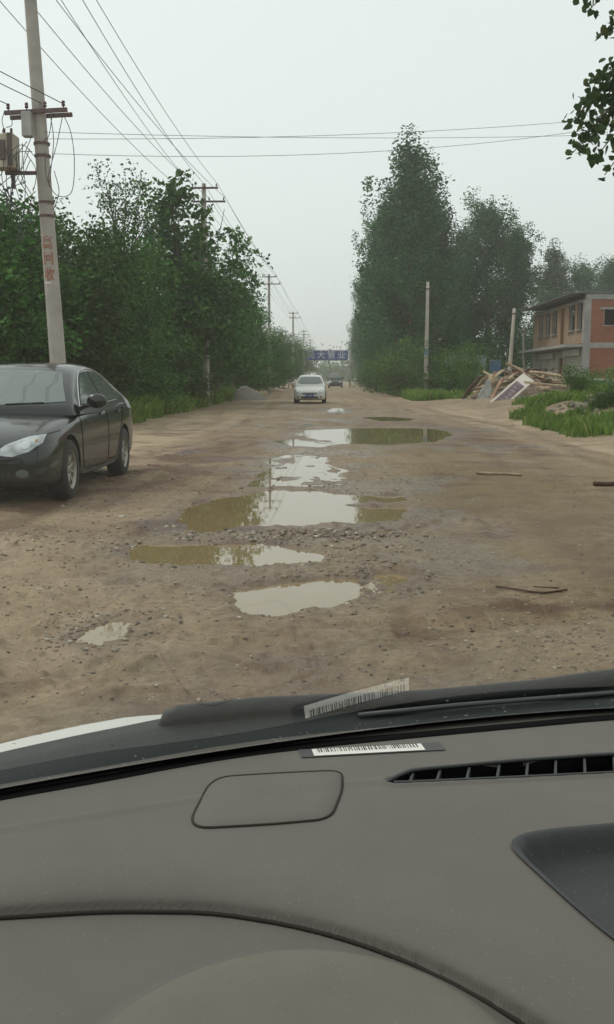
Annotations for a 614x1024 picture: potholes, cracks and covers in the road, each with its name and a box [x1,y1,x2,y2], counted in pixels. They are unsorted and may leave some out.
pothole [282,427,470,446]
pothole [166,486,427,534]
pothole [237,454,358,488]
pothole [117,537,339,567]
pothole [71,610,148,648]
pothole [263,437,346,448]
pothole [210,570,380,618]
